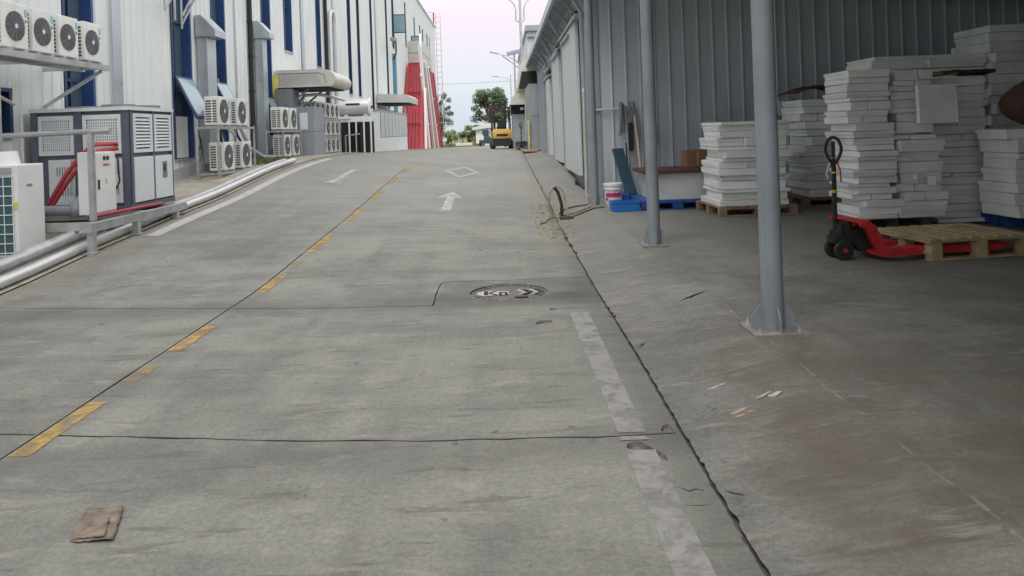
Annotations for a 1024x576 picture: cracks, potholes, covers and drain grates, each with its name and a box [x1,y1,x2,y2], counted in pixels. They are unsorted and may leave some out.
manhole cover [466,283,551,302]
pothole [627,441,668,461]
crack [679,487,744,506]
